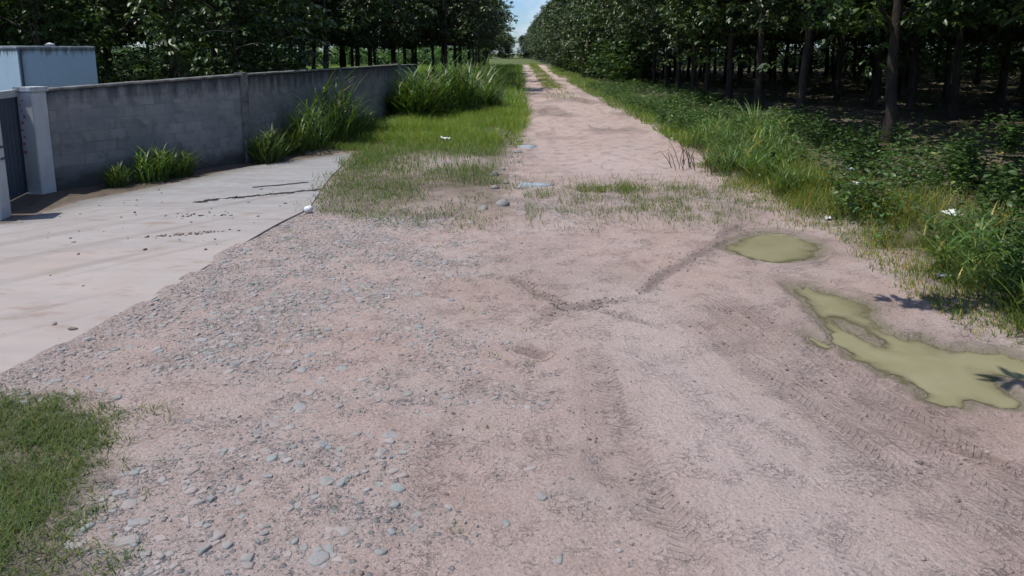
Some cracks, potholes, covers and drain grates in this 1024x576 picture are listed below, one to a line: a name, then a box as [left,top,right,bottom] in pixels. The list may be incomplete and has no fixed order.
crack [190,181,320,204]
pothole [707,229,838,266]
pothole [769,278,1024,420]
